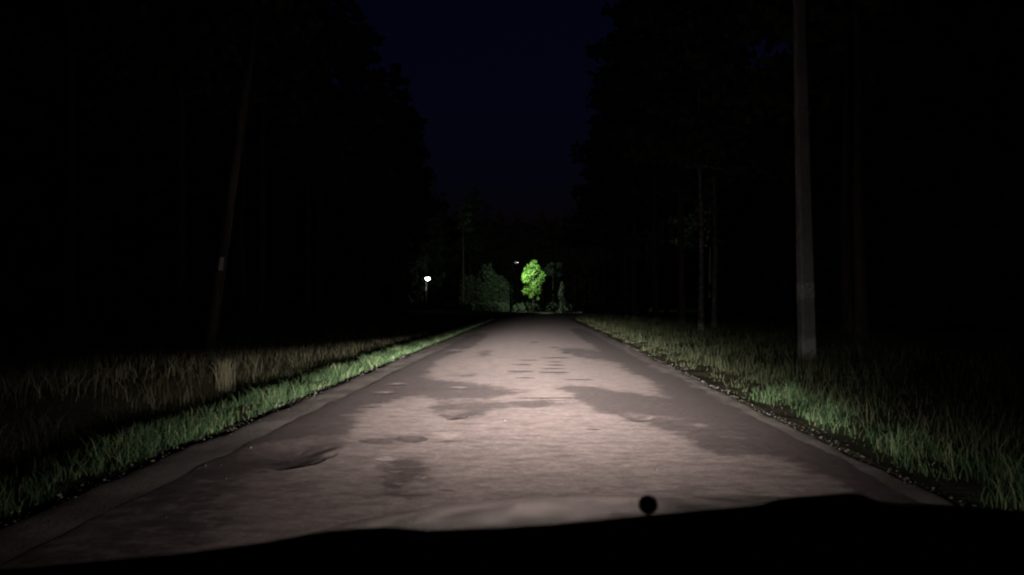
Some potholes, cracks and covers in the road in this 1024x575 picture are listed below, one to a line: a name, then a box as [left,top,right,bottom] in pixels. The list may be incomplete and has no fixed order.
pothole [617,411,654,422]
pothole [237,435,351,471]
pothole [432,408,473,420]
